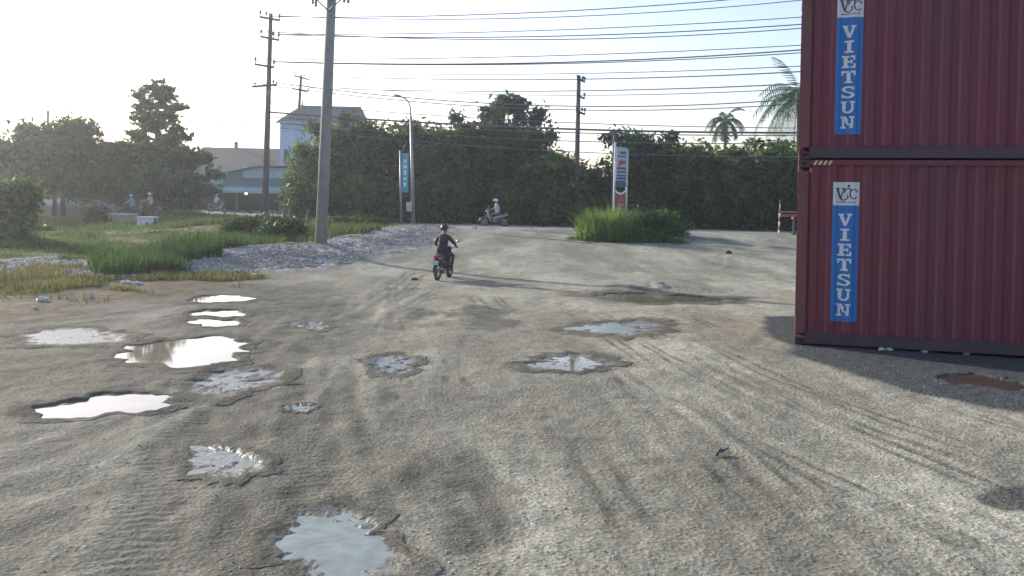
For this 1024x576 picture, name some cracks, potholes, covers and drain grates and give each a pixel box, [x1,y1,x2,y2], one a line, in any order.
pothole [93,332,267,374]
pothole [169,363,303,406]
pothole [546,317,679,341]
pothole [176,317,250,328]
pothole [3,387,190,424]
pothole [282,320,338,333]
pothole [175,293,267,304]
pothole [924,370,1024,394]
pothole [178,307,256,319]
pothole [275,402,324,414]
pothole [575,289,750,305]
pothole [172,439,283,487]
